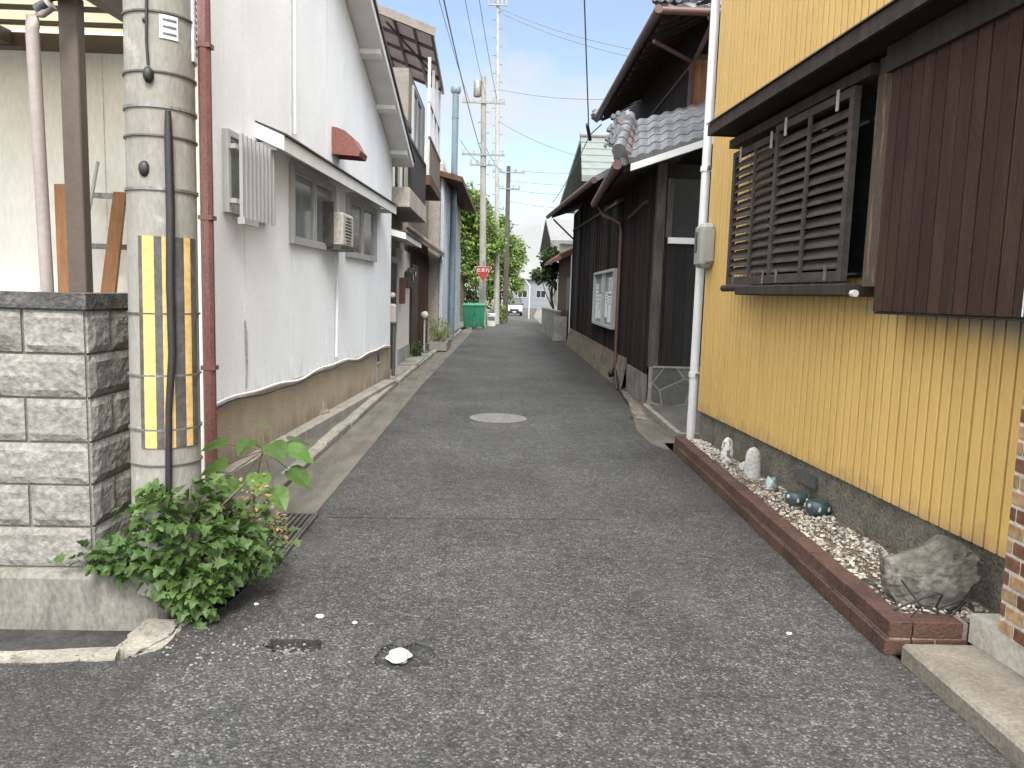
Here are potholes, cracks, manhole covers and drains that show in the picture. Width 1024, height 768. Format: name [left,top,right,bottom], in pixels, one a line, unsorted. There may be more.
pothole [262,639,324,655]
drain grate [251,512,319,567]
pothole [373,643,435,673]
manhole cover [470,413,527,423]
